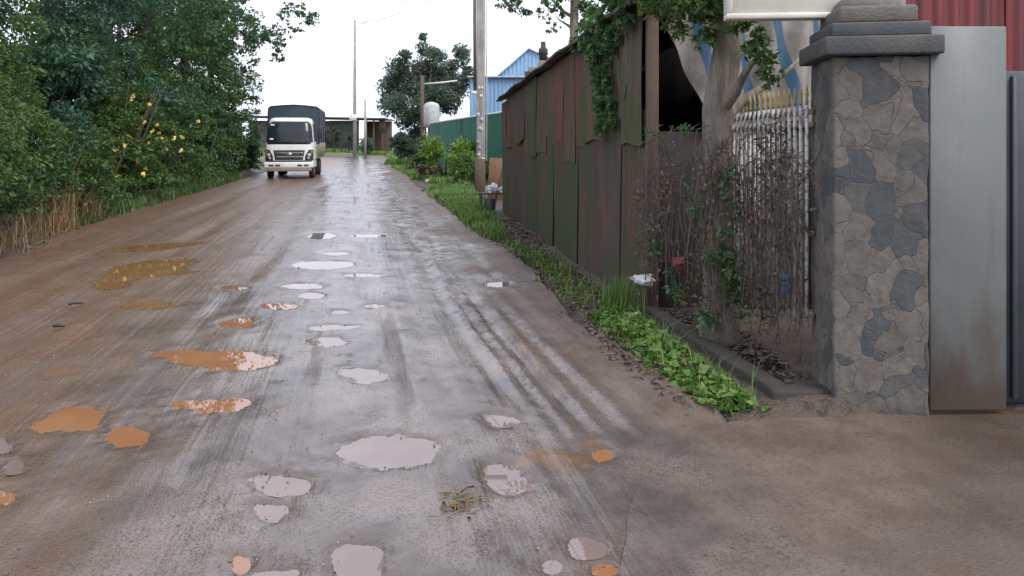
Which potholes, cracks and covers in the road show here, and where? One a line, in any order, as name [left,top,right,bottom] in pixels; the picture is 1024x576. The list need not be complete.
pothole [338,366,389,384]
pothole [242,470,318,499]
pothole [253,501,295,523]
pothole [568,532,609,567]
pothole [197,314,256,329]
pothole [150,349,282,372]
pothole [328,542,387,576]
pothole [482,462,535,496]
pothole [29,406,112,434]
pothole [328,432,444,471]
pothole [94,259,199,290]
pothole [102,424,150,448]
